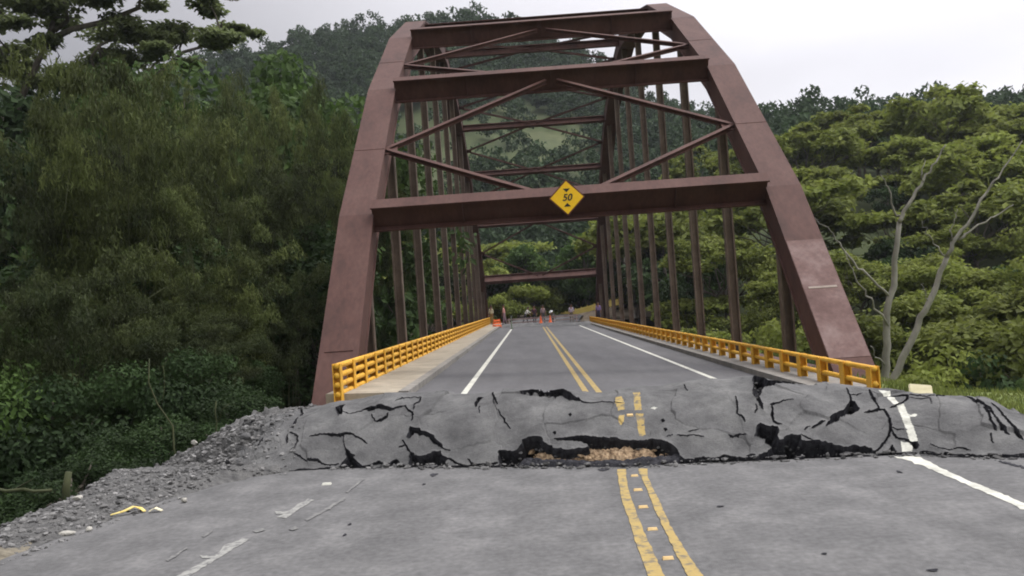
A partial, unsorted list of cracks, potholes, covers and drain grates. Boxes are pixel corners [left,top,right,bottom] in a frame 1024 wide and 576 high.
crack [474,389,624,429]
pothole [498,435,689,467]
crack [694,376,1024,463]
crack [285,396,498,468]
crack [667,429,704,437]
